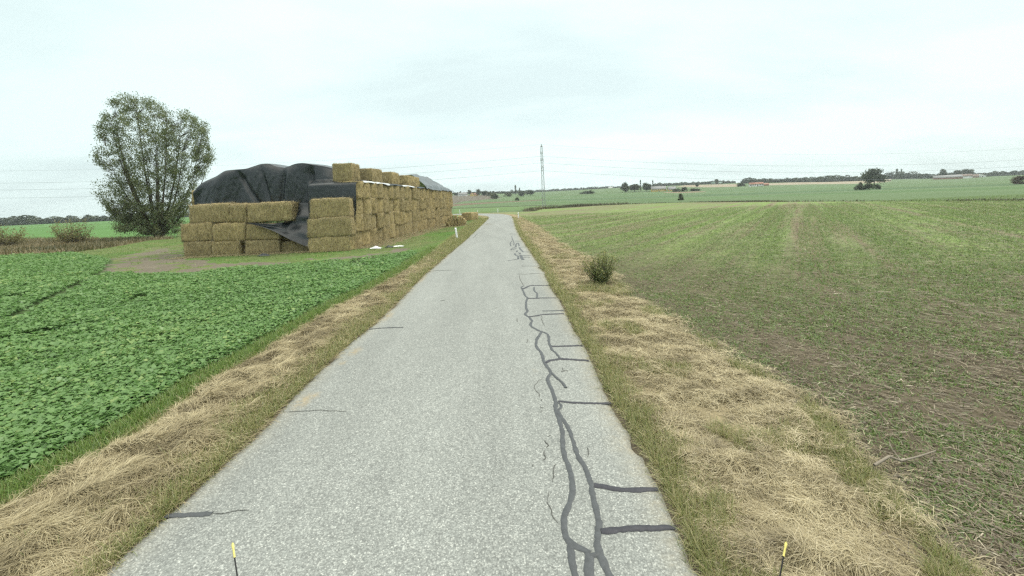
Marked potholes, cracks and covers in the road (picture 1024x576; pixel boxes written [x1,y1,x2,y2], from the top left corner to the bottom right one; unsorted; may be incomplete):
crack [517,321,558,523]
crack [507,236,542,274]
